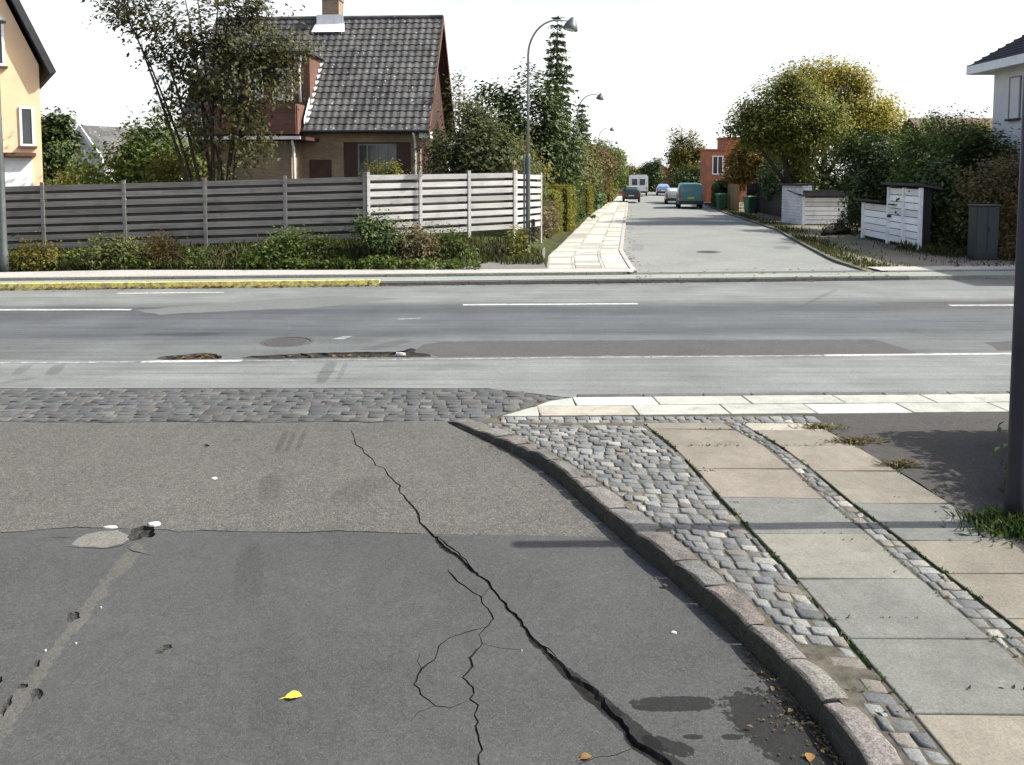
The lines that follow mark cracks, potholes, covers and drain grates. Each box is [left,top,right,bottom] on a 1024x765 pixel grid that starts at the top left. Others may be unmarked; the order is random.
manhole cover [259,336,315,347]
crack [154,431,673,765]
pothole [243,348,431,359]
pothole [30,688,43,701]
pothole [0,695,13,717]
pothole [127,526,156,542]
